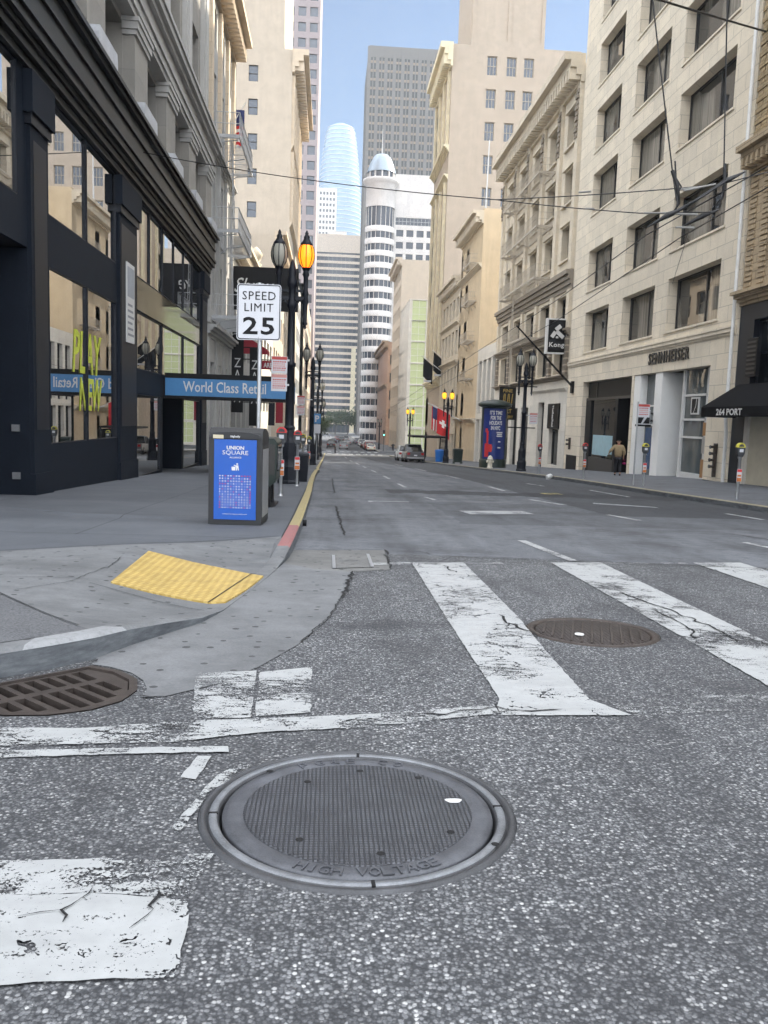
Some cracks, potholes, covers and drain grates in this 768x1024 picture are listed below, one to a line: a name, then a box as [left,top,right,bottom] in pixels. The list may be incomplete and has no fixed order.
manhole cover [197,751,517,896]
crack [599,592,768,645]
utility cover [332,554,374,568]
crack [325,479,392,569]
crack [129,890,161,928]
manhole cover [526,617,660,648]
crack [301,571,354,641]
crack [499,614,538,637]
drain grate [0,665,137,716]
